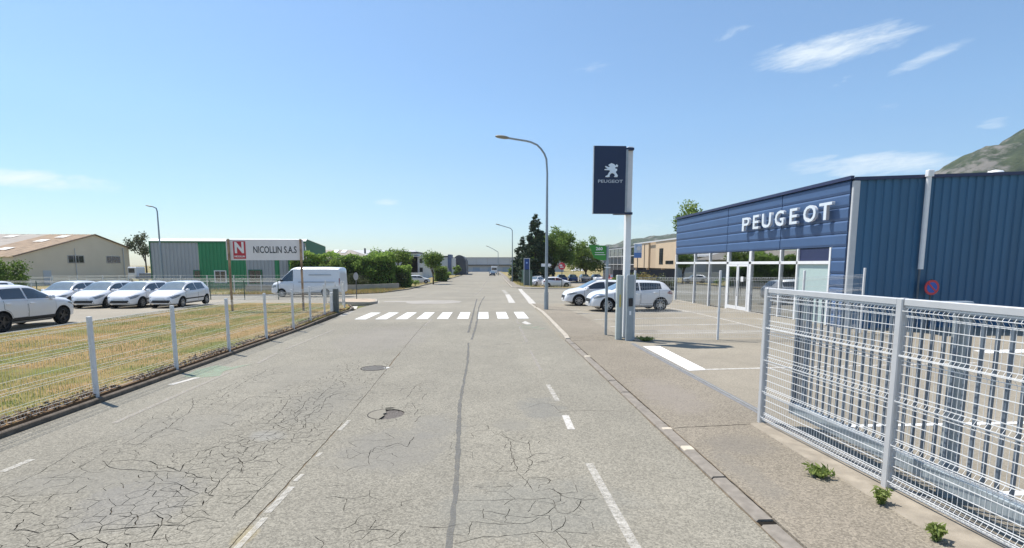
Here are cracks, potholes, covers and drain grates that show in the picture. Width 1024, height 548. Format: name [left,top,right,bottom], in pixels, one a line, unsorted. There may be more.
crack [0,361,399,548]
crack [420,425,601,548]
pothole [379,409,404,419]
crack [315,381,437,548]
